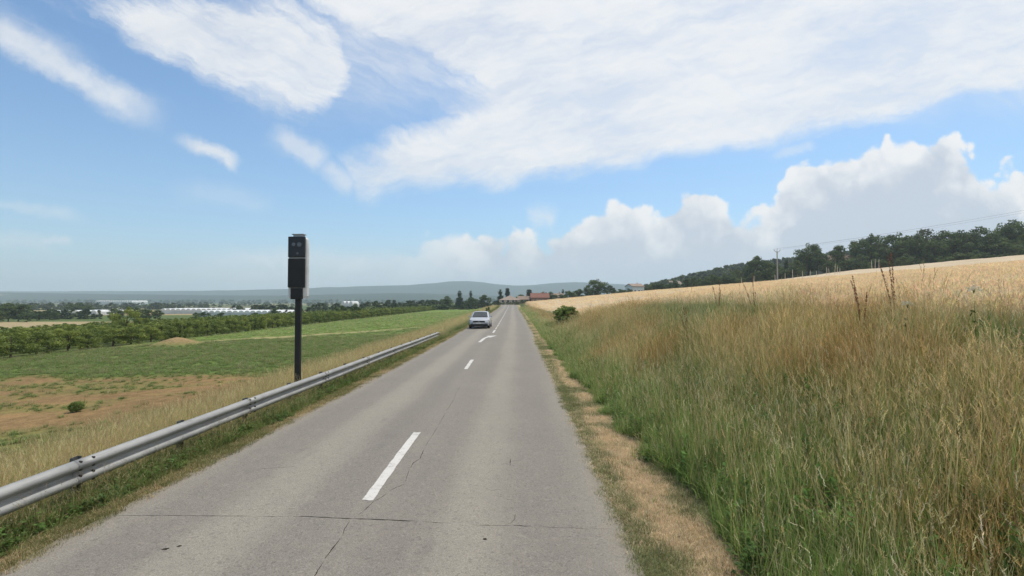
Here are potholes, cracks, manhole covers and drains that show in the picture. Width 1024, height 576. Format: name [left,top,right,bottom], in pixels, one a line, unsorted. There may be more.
crack [123,390,593,576]
